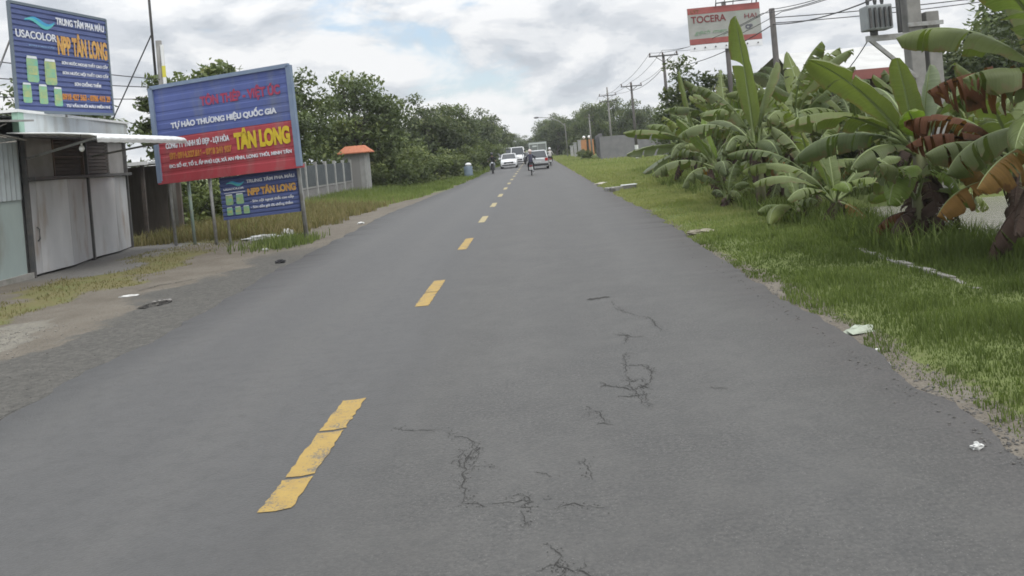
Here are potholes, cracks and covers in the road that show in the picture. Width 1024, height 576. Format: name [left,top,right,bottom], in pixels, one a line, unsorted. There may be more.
crack [395,425,609,527]
crack [587,296,669,405]
crack [536,542,591,576]
